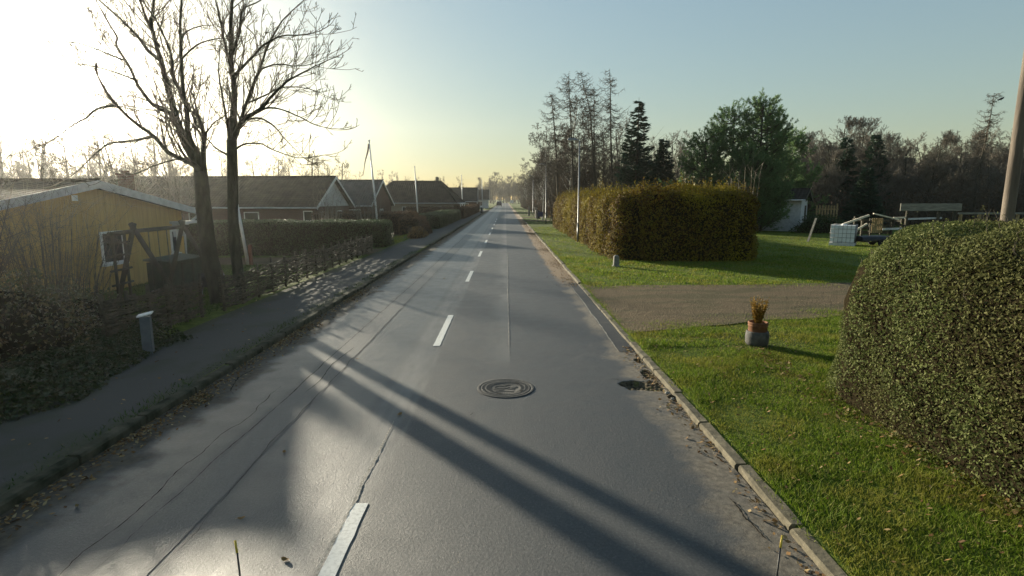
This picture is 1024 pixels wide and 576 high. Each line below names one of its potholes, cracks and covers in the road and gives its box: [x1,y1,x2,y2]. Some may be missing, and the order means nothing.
manhole cover [477,378,534,398]
pothole [613,380,667,393]
